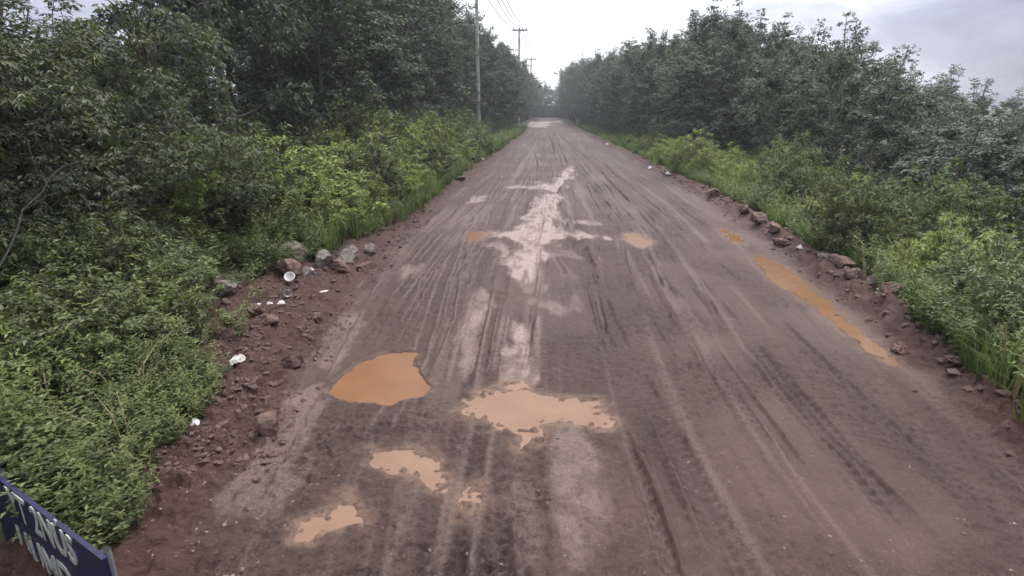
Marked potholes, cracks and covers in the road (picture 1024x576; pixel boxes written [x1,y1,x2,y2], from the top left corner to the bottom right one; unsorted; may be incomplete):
pothole [322,348,438,408]
pothole [455,378,622,457]
pothole [364,442,461,496]
pothole [460,229,493,244]
pothole [283,487,370,548]
pothole [621,231,657,250]
